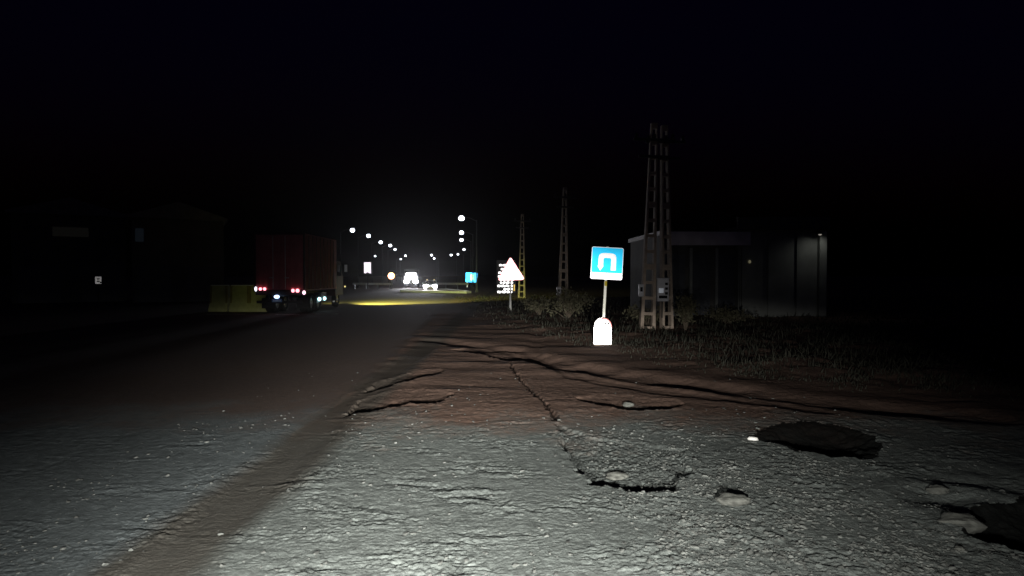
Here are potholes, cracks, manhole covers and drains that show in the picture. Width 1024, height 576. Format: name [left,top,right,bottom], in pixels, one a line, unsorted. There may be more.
pothole [961,496,1024,552]
pothole [575,393,685,411]
crack [510,362,560,421]
pothole [554,422,696,492]
pothole [753,420,883,459]
